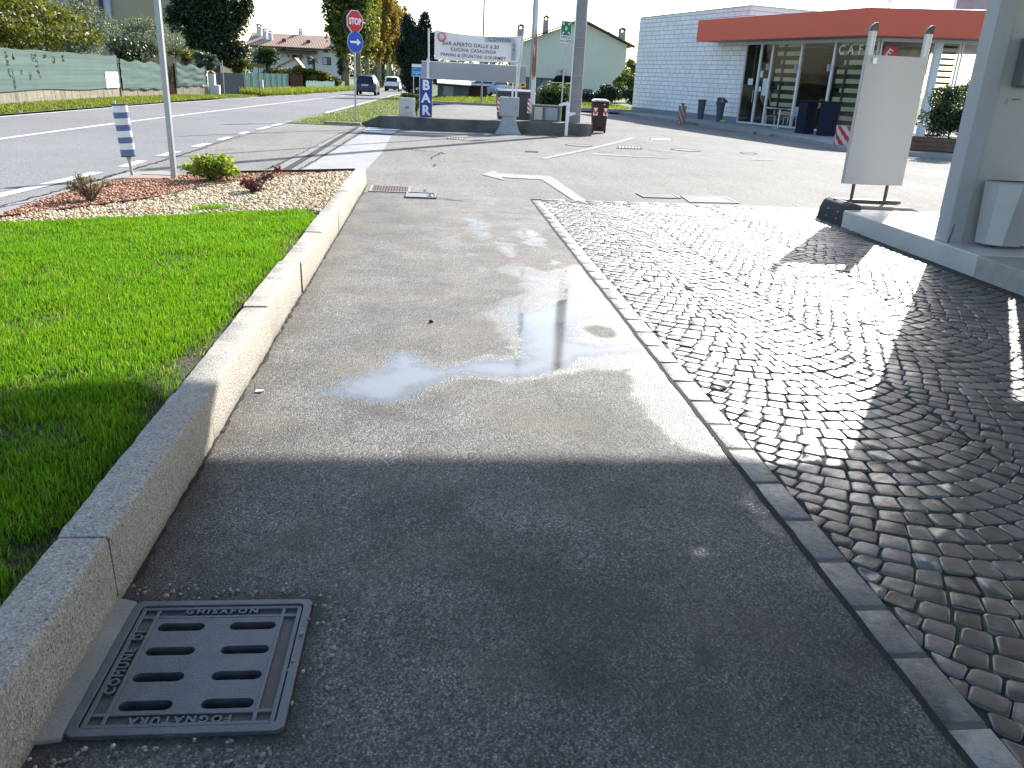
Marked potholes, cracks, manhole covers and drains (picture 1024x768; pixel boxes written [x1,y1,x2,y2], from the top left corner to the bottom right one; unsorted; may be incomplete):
manhole cover [681,195,739,204]
manhole cover [405,191,436,199]
drain grate [369,185,411,193]
drain grate [34,598,312,745]
